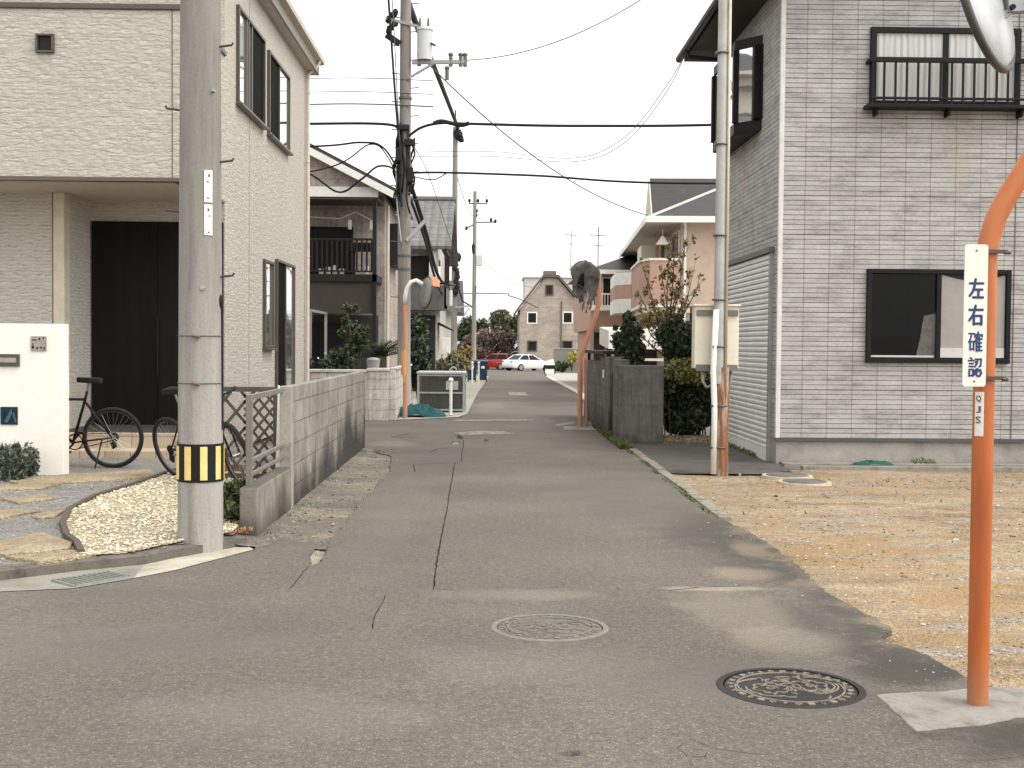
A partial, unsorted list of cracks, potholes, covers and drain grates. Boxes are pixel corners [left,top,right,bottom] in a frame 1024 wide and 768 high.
drain grate [51,570,135,587]
manhole cover [761,472,813,480]
manhole cover [716,668,867,709]
pothole [308,542,330,565]
crack [413,440,464,591]
crack [677,736,752,757]
manhole cover [778,478,832,487]
manhole cover [491,614,609,641]
